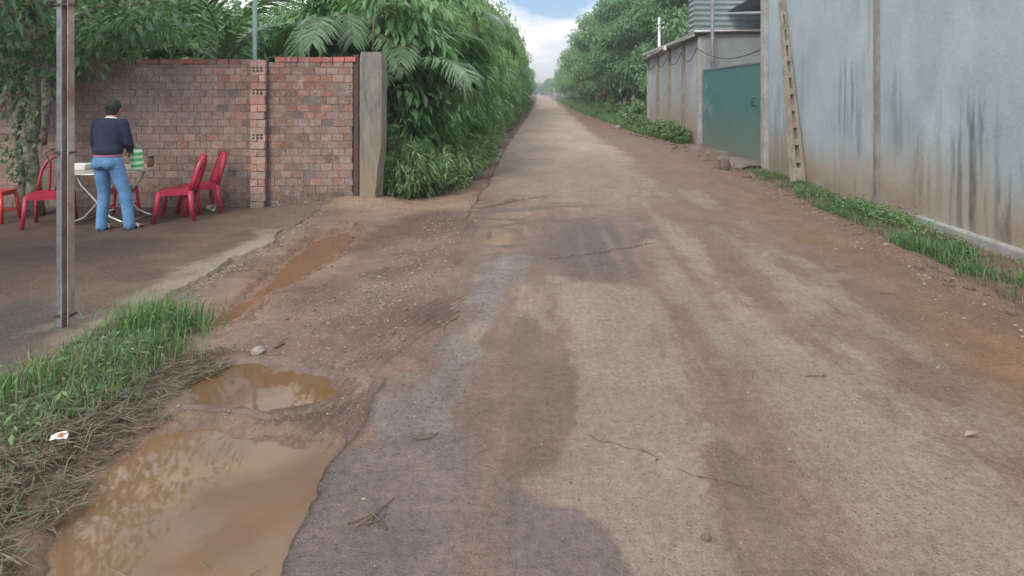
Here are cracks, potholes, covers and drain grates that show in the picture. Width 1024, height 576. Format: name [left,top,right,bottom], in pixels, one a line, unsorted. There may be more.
crack [591,435,752,487]
pothole [197,222,368,327]
pothole [161,354,374,420]
pothole [8,409,349,576]
